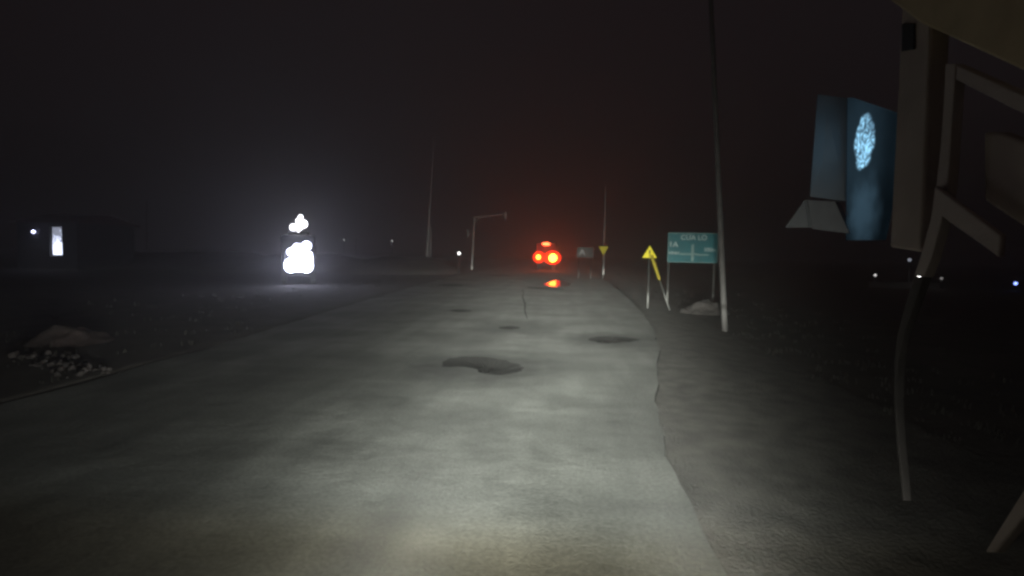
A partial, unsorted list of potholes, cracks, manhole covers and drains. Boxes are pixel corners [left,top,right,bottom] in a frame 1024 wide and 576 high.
crack [522,287,565,320]
pothole [589,336,640,344]
pothole [442,356,524,375]
